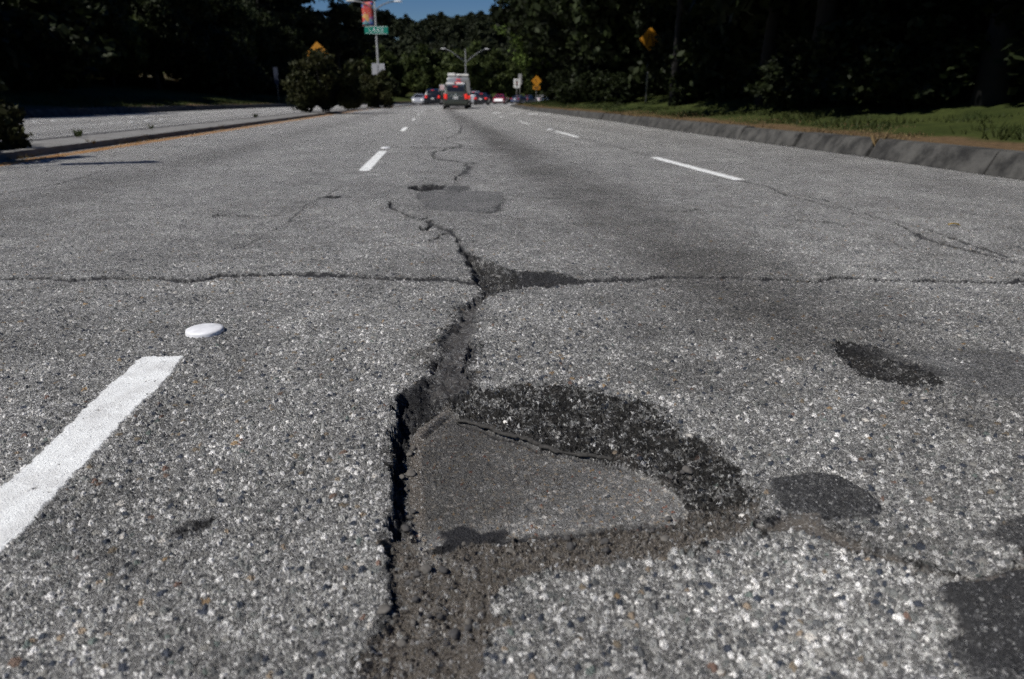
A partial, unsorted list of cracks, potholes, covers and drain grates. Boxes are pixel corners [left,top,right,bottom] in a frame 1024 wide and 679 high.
pothole [358,341,767,679]
crack [574,180,1024,285]
crack [388,202,479,253]
